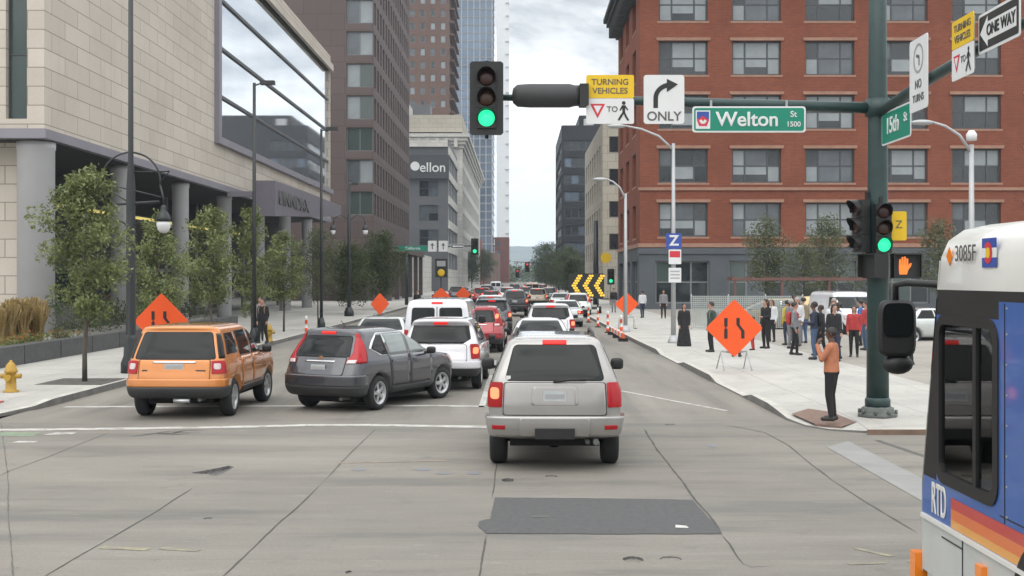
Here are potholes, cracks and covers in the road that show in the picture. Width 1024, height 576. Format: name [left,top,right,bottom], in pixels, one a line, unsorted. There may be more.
pothole [193,466,233,476]
crack [644,429,761,567]
crack [1,424,107,576]
